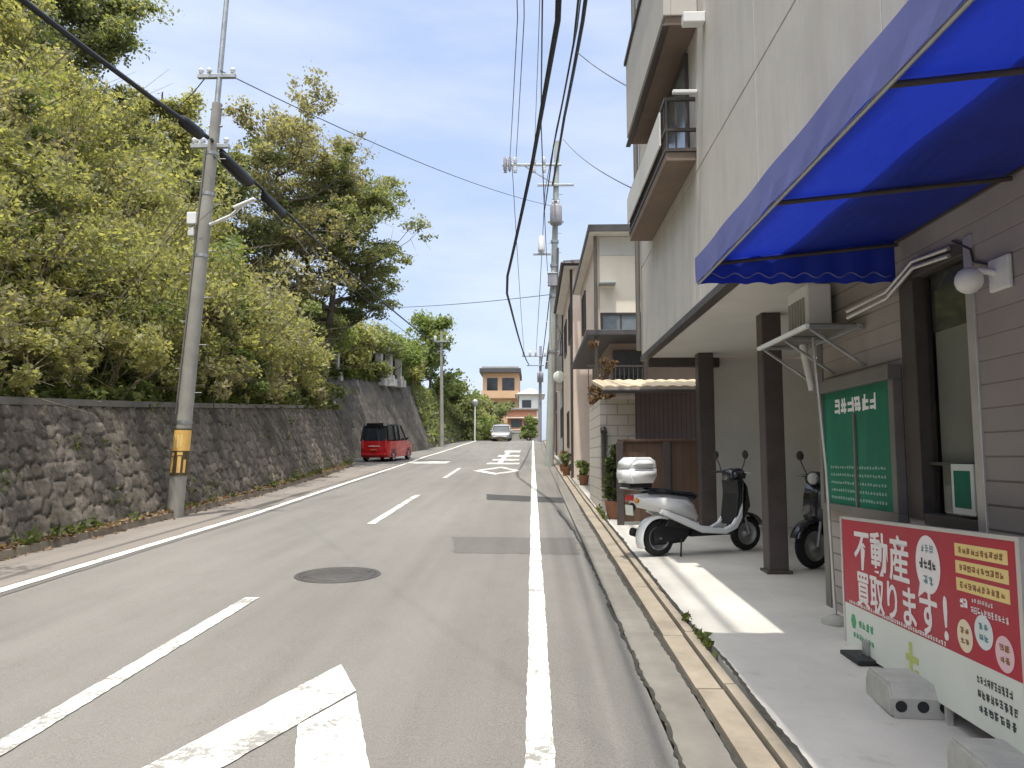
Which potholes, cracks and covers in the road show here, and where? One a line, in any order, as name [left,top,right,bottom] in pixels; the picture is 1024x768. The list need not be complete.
manhole cover [294,567,381,583]
